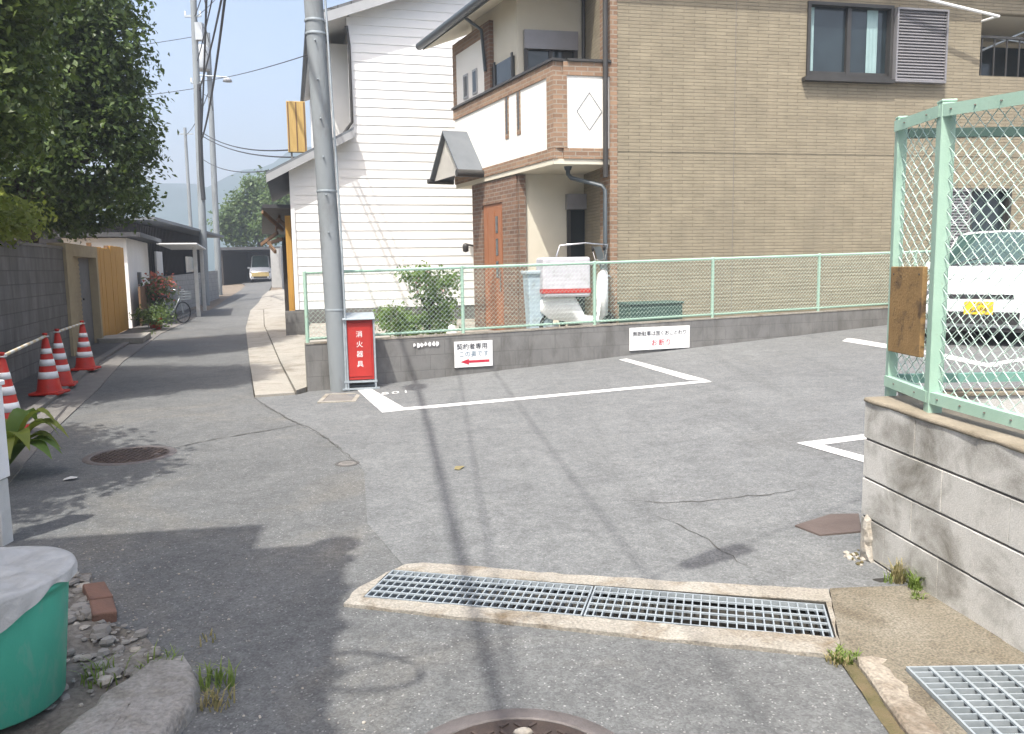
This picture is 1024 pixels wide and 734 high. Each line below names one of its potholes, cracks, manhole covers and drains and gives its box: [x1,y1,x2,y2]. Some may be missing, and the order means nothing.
utility cover [317,393,360,404]
drain grate [364,570,593,616]
crack [630,489,798,562]
drain grate [906,664,1024,734]
manhole cover [82,445,177,466]
manhole cover [425,708,615,734]
drain grate [584,586,834,637]
